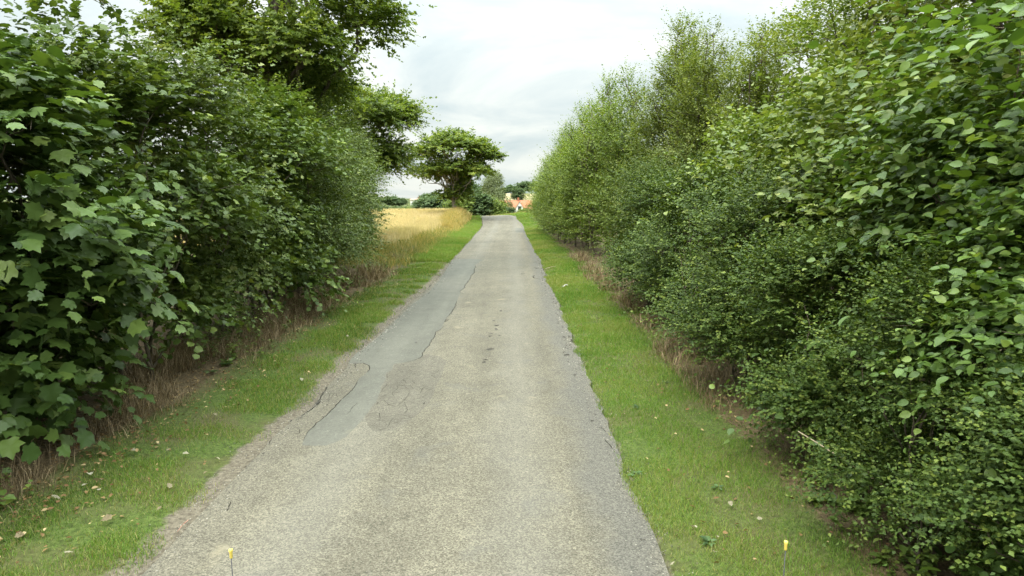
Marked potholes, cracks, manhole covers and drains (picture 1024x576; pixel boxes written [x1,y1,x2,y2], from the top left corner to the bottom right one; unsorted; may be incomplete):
crack [296,363,370,441]
crack [371,265,476,435]
